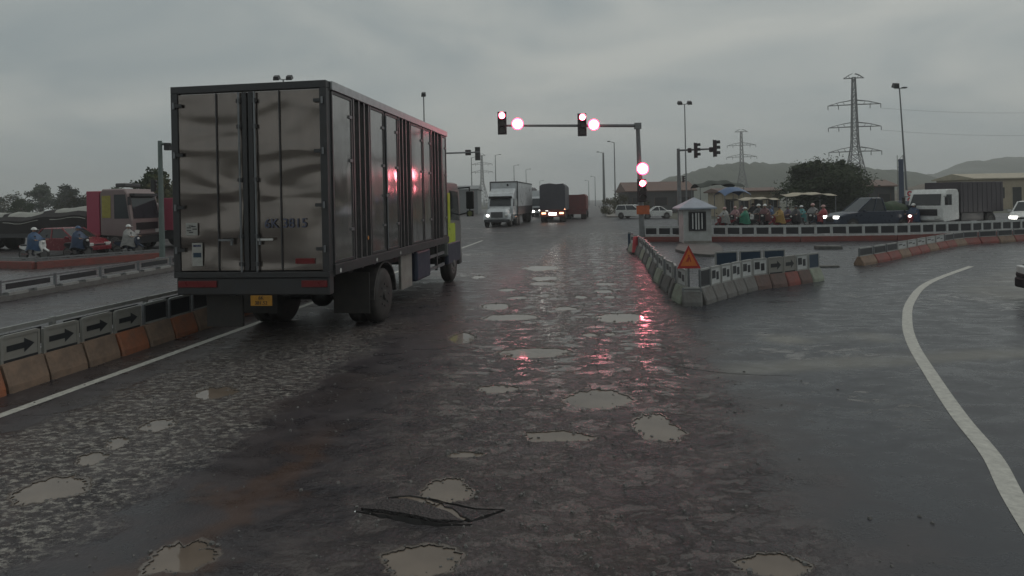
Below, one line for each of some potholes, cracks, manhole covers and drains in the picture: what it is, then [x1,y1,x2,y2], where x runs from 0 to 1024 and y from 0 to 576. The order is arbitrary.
pothole [76,452,112,466]
pothole [477,384,519,393]
pothole [377,544,469,576]
pothole [195,385,240,400]
pothole [496,347,573,360]
pothole [632,412,687,442]
pothole [594,313,647,323]
pothole [732,551,812,576]
pothole [521,430,596,442]
pothole [563,387,634,409]
pothole [447,332,477,344]
pothole [138,419,180,432]
